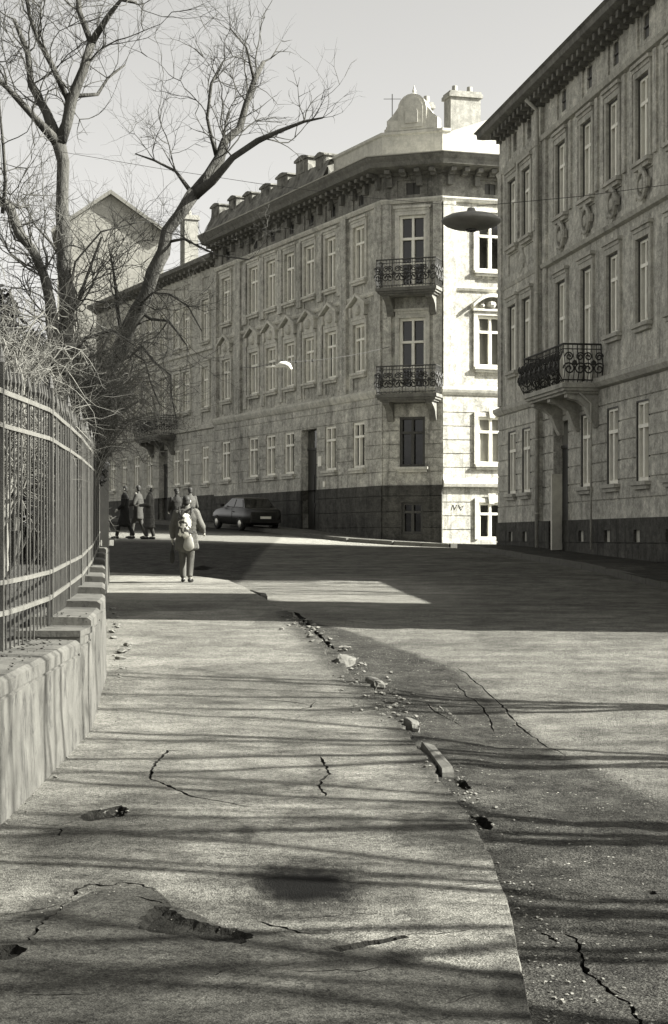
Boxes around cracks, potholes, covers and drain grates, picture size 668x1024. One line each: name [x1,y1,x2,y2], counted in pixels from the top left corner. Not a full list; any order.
pothole [453,779,472,790]
pothole [0,944,27,960]
pothole [469,816,494,830]
crack [317,756,331,797]
crack [294,612,334,649]
crack [2,882,162,942]
crack [535,932,643,1024]
pothole [137,906,253,944]
crack [426,669,565,756]
crack [261,913,362,934]
pothole [78,805,128,822]
crack [149,750,250,807]
